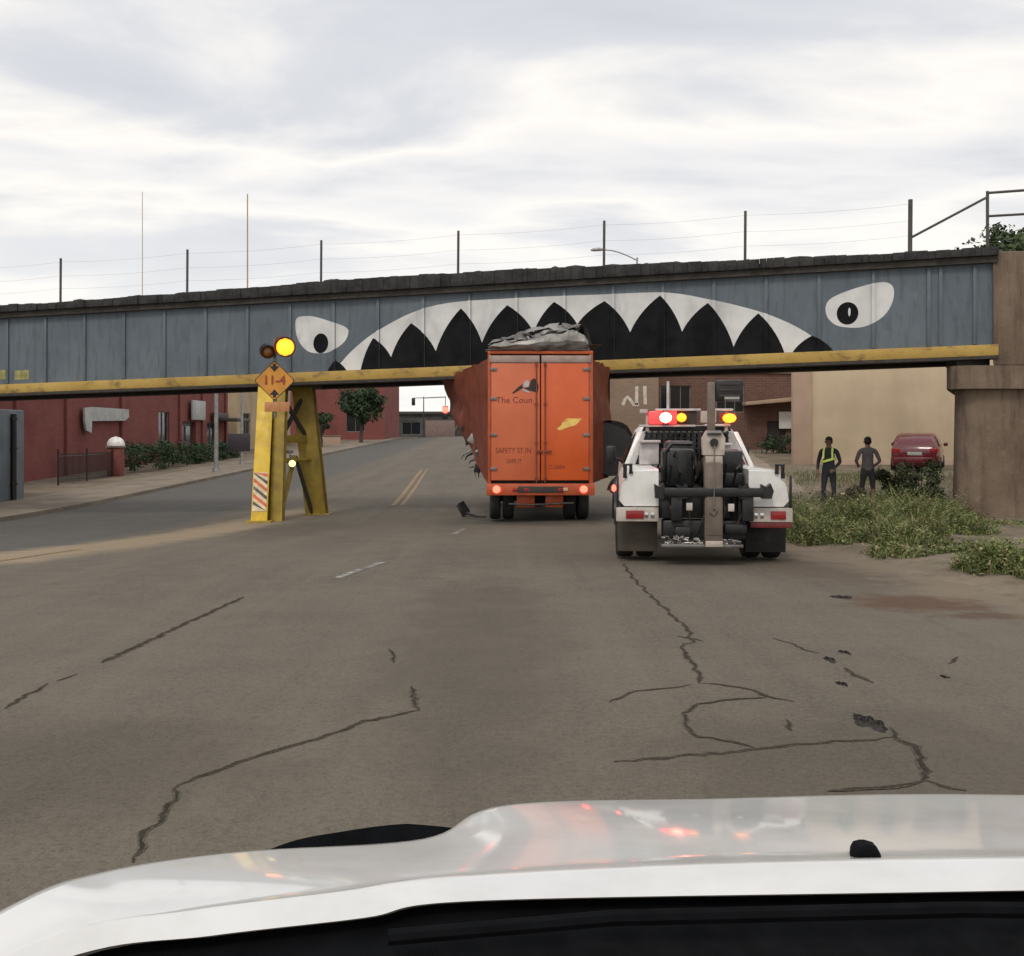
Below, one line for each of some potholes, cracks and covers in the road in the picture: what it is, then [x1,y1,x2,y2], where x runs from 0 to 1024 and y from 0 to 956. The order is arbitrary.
crack [5,674,76,708]
crack [132,686,420,862]
crack [609,564,964,791]
pothole [852,713,888,733]
